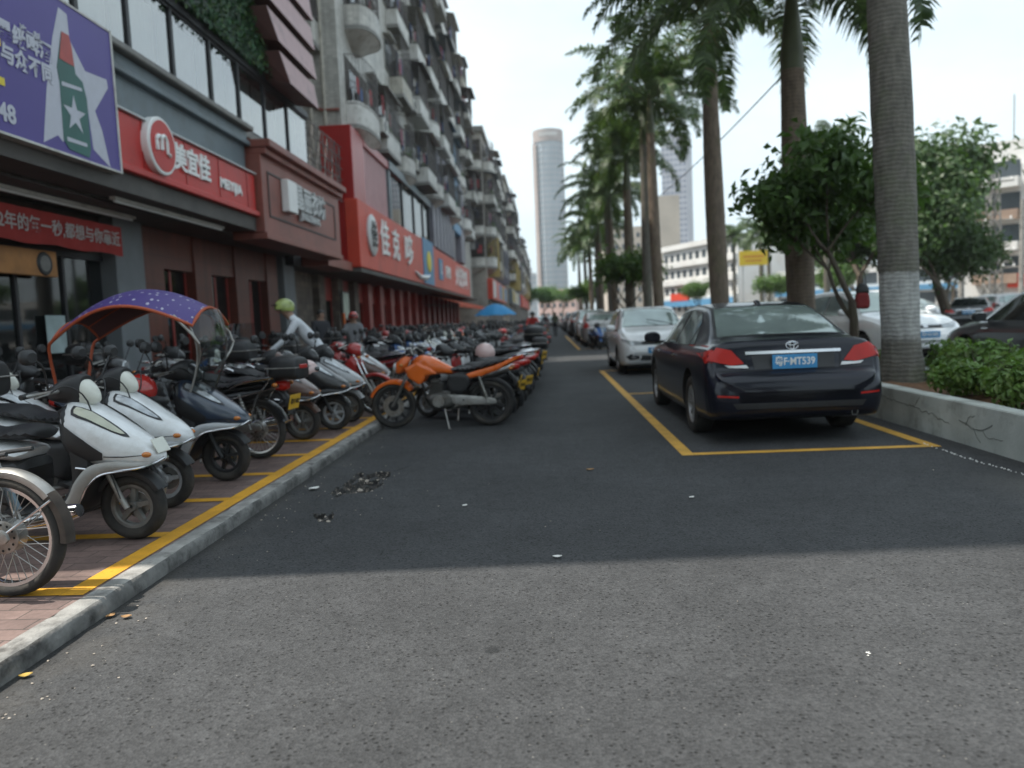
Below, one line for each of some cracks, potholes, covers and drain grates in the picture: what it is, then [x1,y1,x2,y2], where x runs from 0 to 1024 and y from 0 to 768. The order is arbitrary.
pothole [313,512,335,523]
pothole [330,471,391,497]
